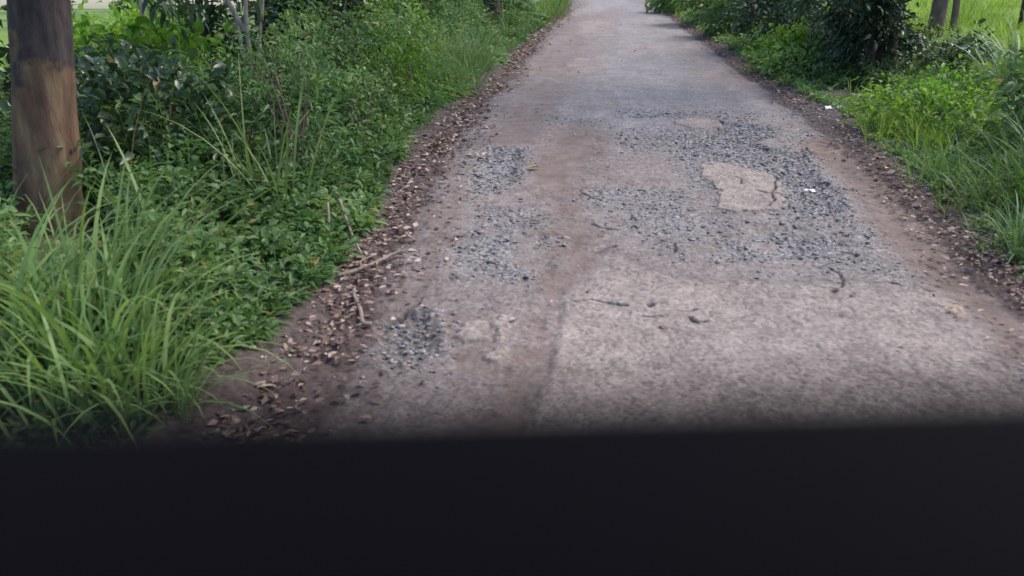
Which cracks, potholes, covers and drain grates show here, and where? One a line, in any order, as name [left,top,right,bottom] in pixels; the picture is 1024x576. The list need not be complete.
crack [810,265,847,288]
crack [734,176,790,206]
pothole [360,307,453,368]
pothole [669,116,862,218]
pothole [454,146,531,196]
